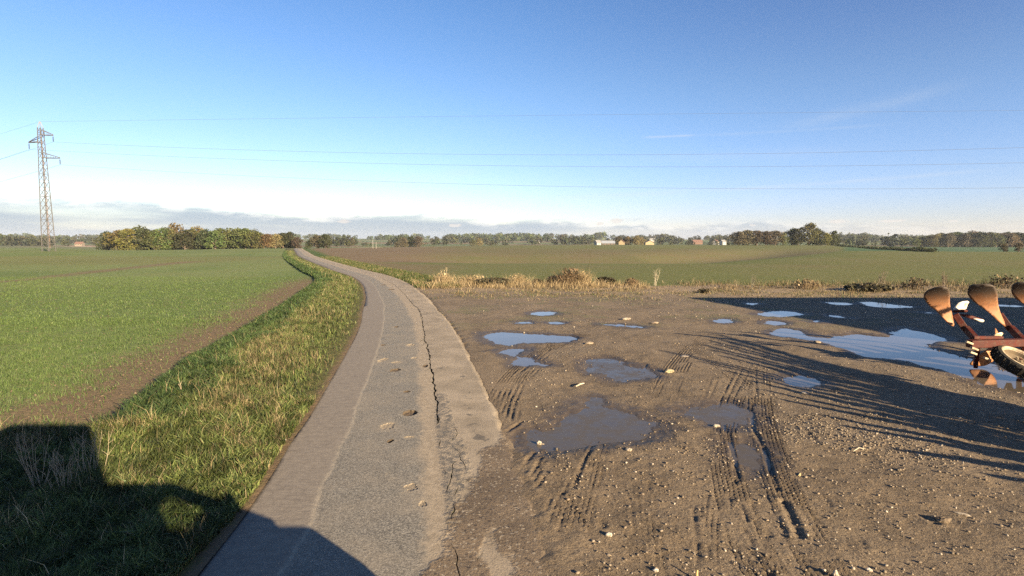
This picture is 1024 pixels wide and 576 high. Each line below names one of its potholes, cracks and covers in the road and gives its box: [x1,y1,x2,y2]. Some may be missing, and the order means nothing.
crack [392,283,468,518]
